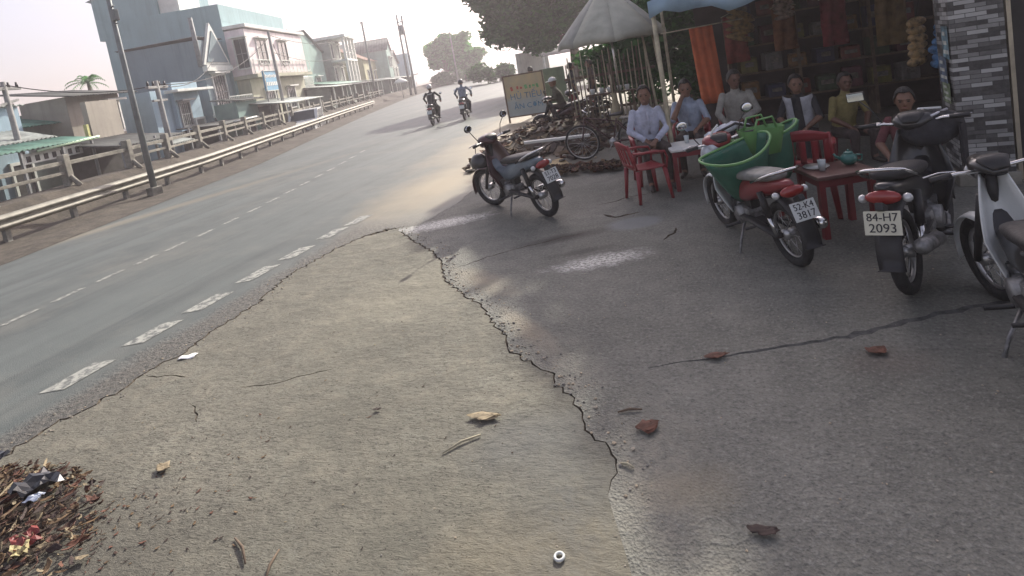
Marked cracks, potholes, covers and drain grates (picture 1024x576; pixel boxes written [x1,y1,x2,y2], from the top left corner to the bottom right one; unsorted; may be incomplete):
crack [599,193,651,218]
crack [4,192,618,493]
